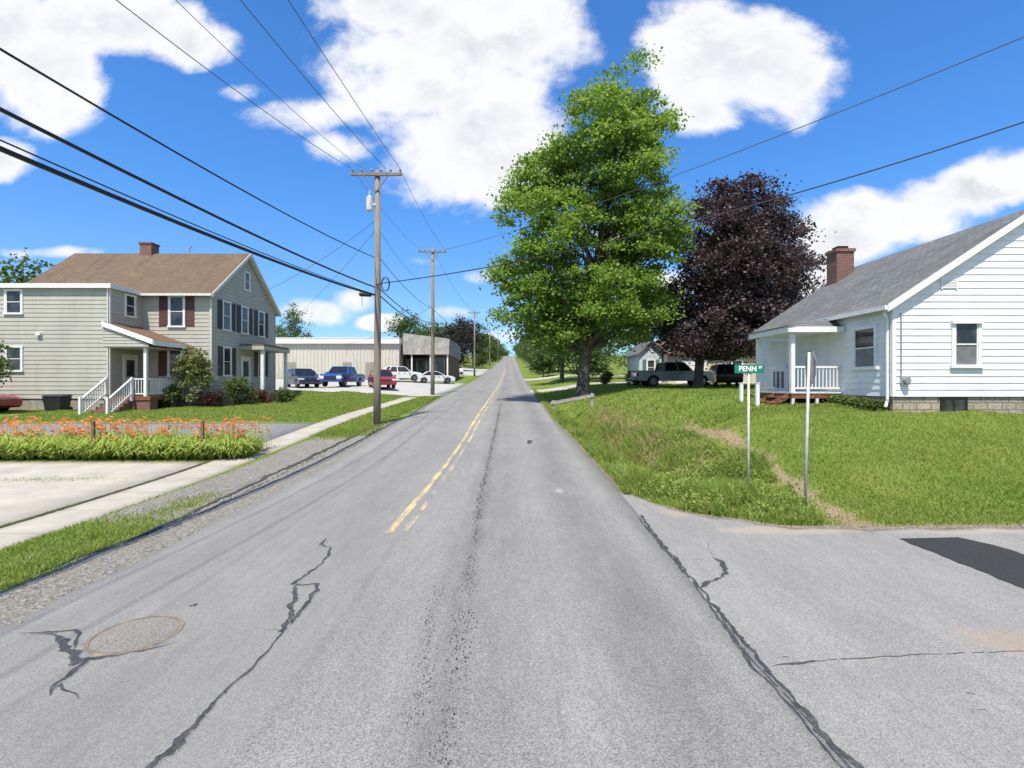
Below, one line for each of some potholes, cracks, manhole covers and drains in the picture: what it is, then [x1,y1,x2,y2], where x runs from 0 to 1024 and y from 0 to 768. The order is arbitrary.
manhole cover [83,615,185,656]
crack [772,651,1004,666]
